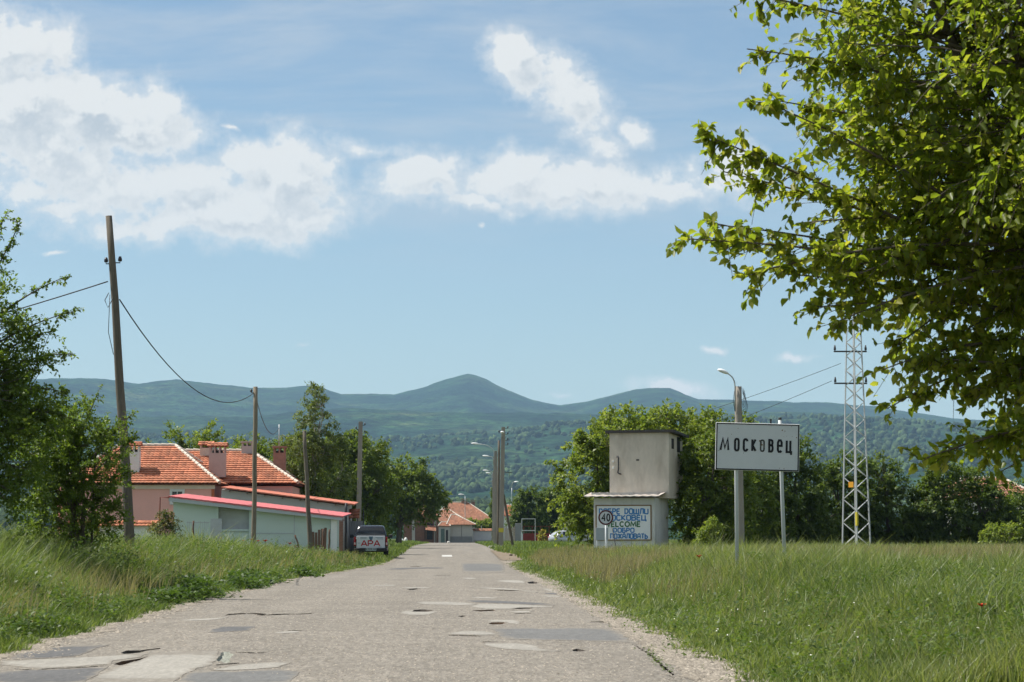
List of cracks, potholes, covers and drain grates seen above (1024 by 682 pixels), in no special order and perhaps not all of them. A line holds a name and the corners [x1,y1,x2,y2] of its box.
crack [227,613,311,631]
